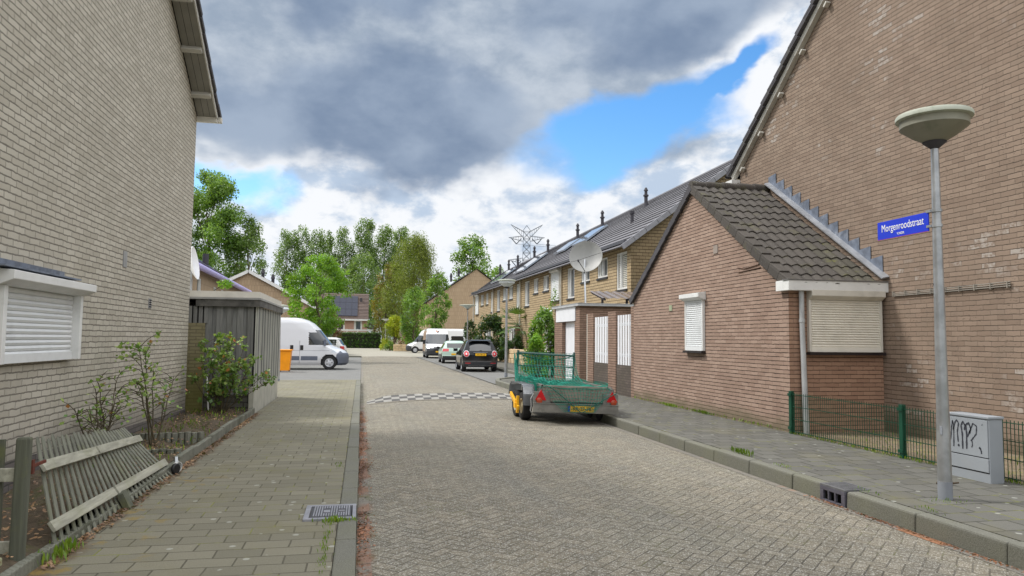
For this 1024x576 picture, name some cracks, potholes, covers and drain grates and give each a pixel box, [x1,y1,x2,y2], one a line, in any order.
drain grate [820,482,871,508]
